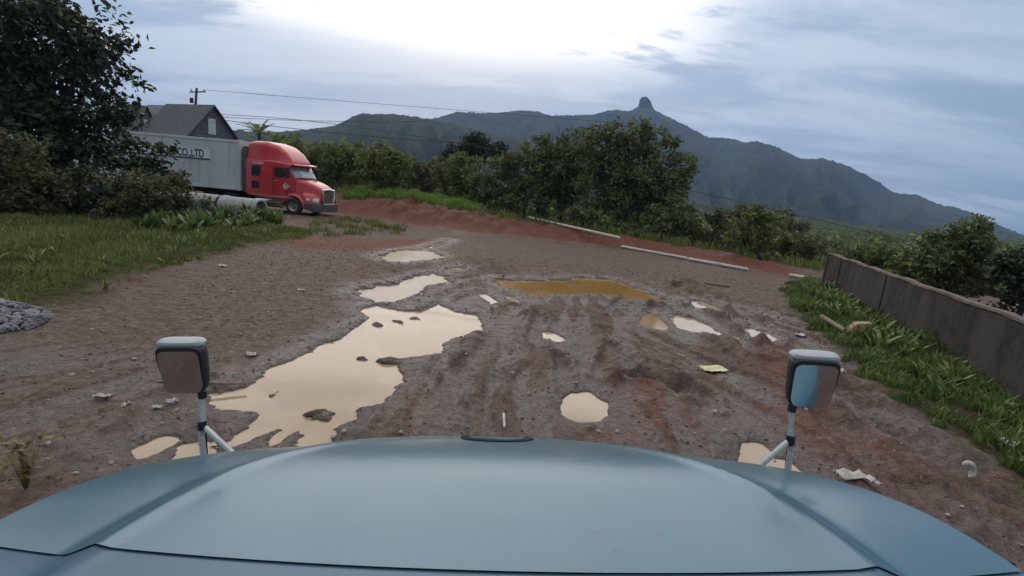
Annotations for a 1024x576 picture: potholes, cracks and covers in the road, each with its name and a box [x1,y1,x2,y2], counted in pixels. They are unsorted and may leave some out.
pothole [728,433,786,469]
pothole [665,312,722,335]
pothole [635,309,674,330]
pothole [205,300,492,450]
pothole [376,248,450,262]
pothole [488,275,672,304]
pothole [474,290,504,304]
pothole [537,326,572,342]
pothole [755,328,785,341]
pothole [552,385,621,423]
